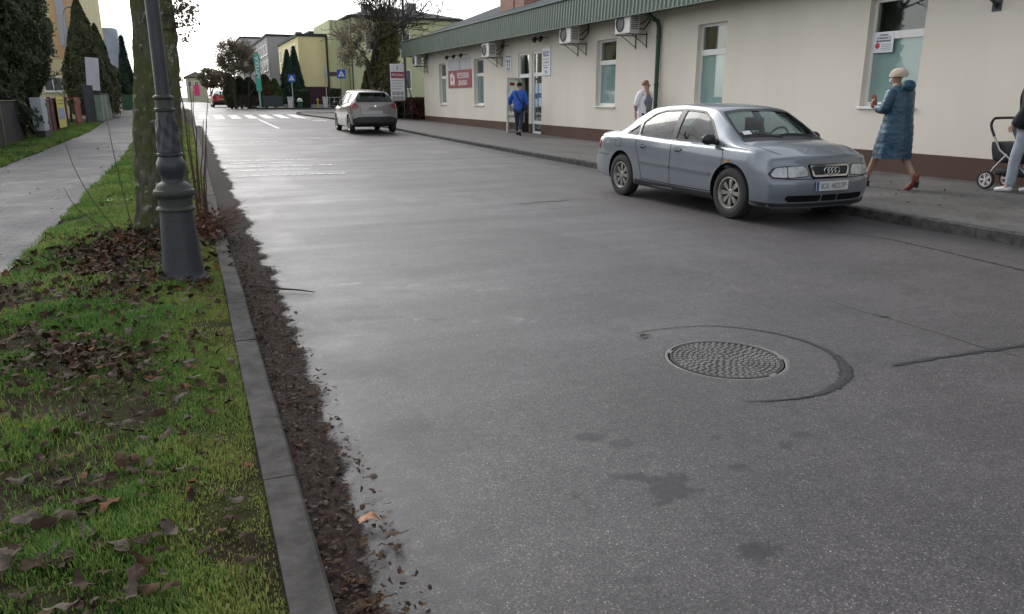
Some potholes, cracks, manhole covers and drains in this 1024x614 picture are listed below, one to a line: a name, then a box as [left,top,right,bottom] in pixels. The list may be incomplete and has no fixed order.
crack [827,299,1018,357]
crack [845,233,1023,270]
manhole cover [665,340,787,380]
